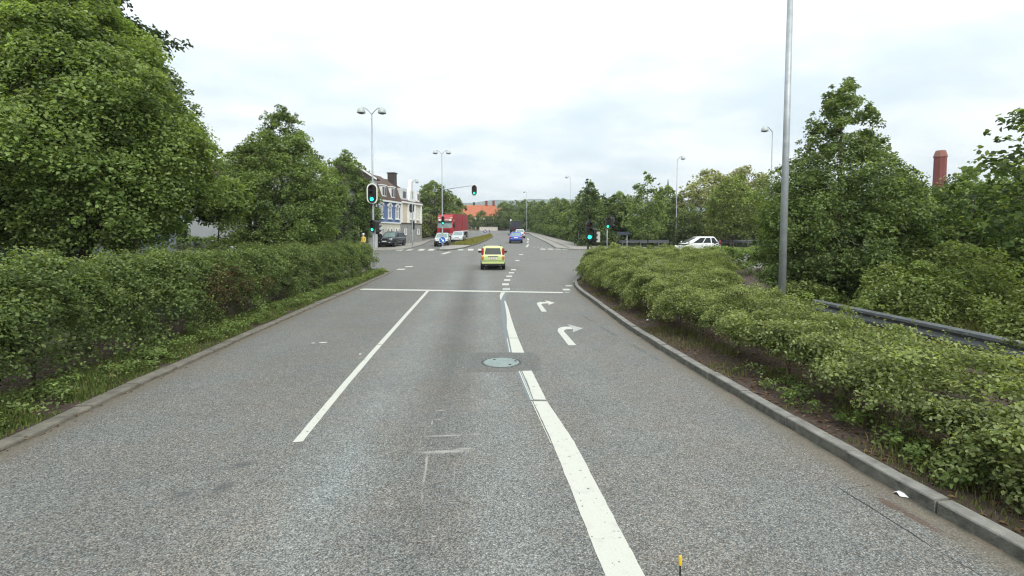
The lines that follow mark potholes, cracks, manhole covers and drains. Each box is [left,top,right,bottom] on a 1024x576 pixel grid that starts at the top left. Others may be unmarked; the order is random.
manhole cover [481,357,521,368]
crack [833,484,982,576]
